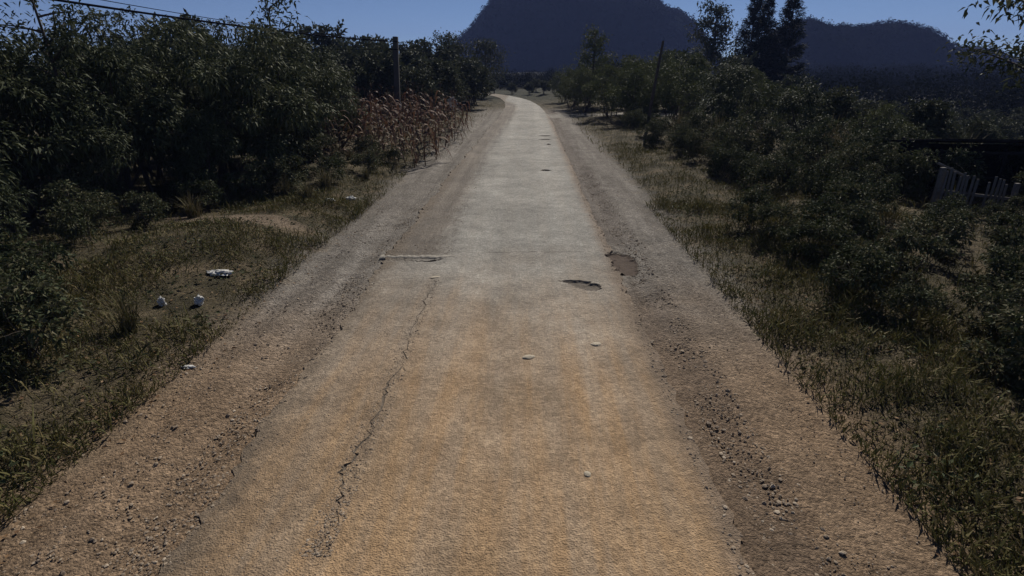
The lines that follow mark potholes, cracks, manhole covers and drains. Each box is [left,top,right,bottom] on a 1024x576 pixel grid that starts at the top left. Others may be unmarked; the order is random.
pothole [557,280,602,291]
crack [335,285,435,528]
pothole [604,253,639,277]
